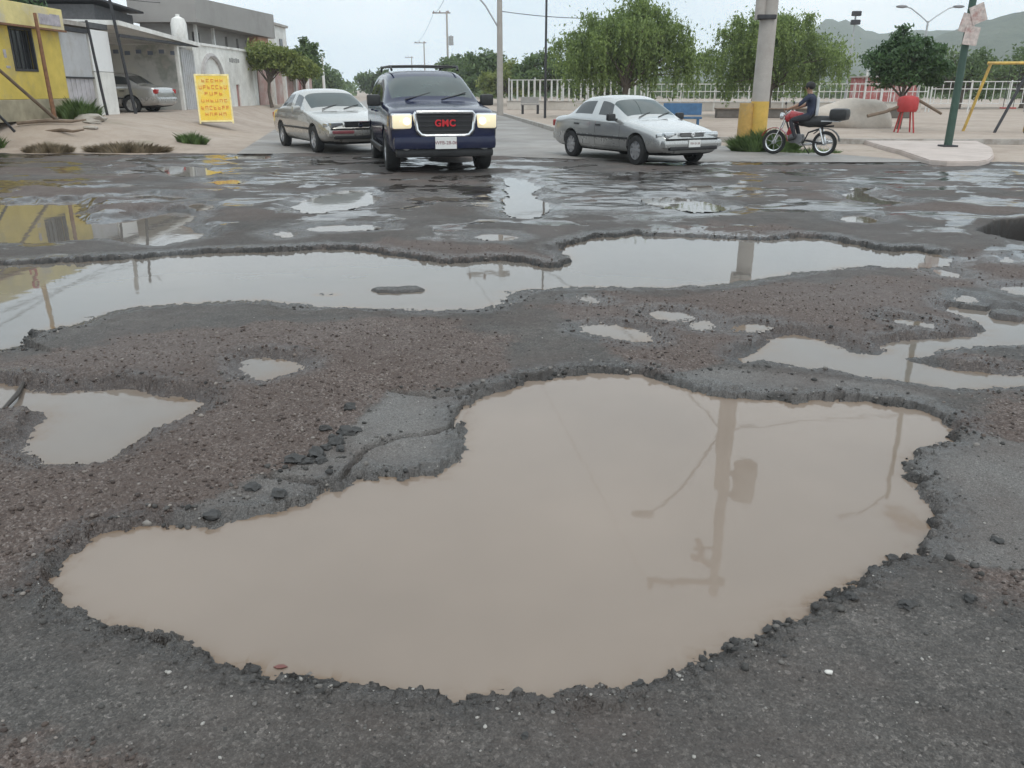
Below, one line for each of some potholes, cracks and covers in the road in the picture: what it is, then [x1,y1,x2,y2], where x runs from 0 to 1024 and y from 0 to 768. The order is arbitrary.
pothole [955,215,1024,244]
crack [259,383,487,492]
pothole [711,294,1024,395]
pothole [483,173,574,220]
pothole [0,227,975,353]
pothole [4,360,988,721]
